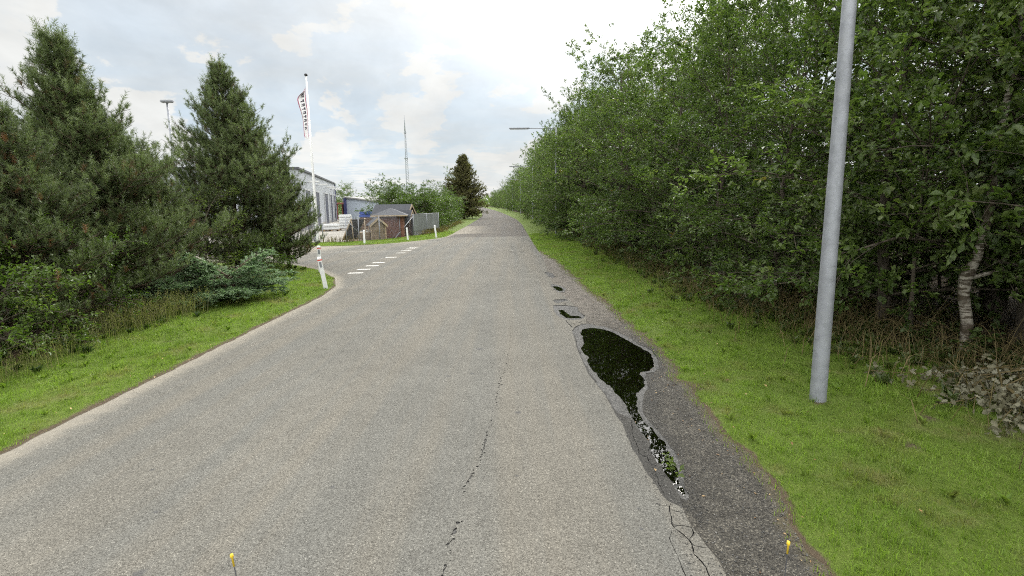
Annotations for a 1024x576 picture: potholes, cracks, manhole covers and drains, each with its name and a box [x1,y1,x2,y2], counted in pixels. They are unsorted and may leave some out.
pothole [553,305,585,320]
pothole [572,324,689,500]
crack [441,326,512,576]
crack [631,419,710,576]
